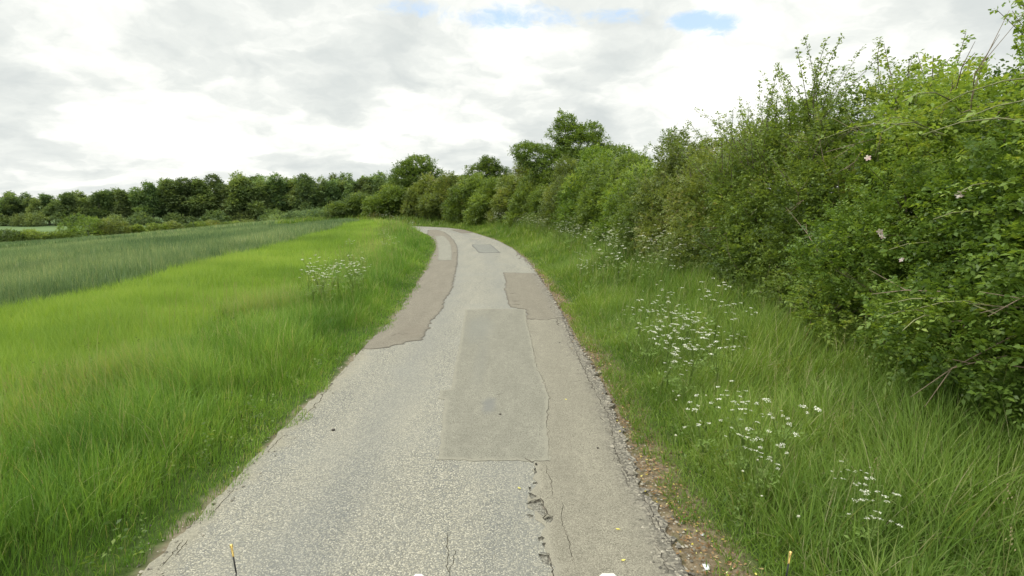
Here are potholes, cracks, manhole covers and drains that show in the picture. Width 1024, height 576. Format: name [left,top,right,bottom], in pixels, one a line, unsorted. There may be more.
crack [511,293,687,574]
crack [446,535,456,574]
crack [161,489,234,567]
